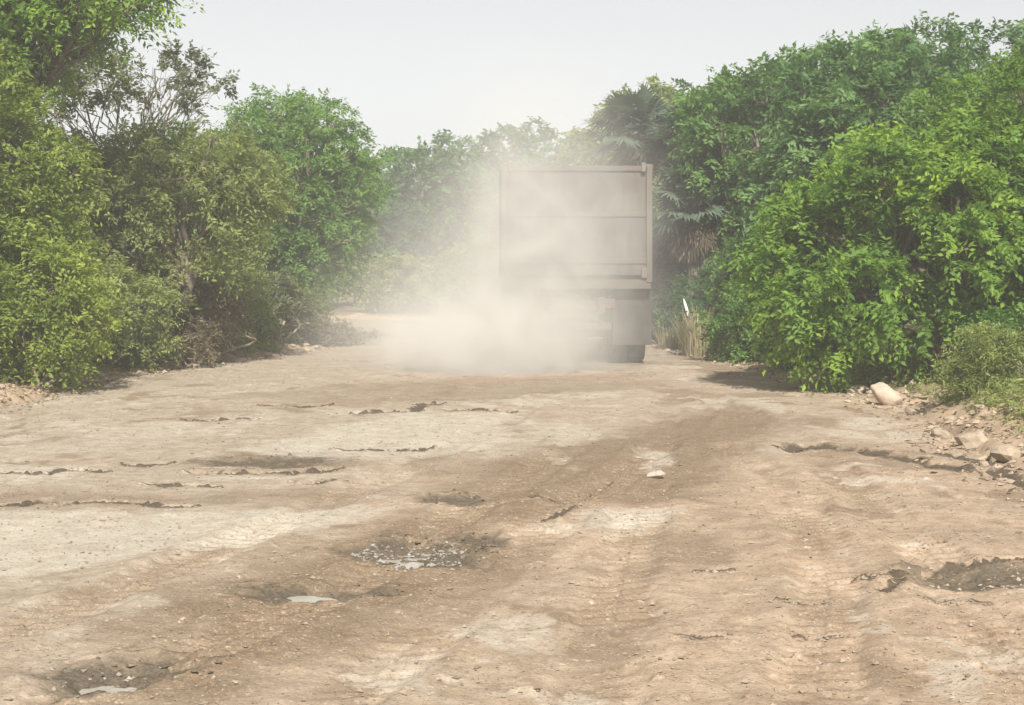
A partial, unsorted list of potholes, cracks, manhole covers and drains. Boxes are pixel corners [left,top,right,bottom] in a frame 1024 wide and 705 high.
pothole [14,647,235,705]
pothole [403,488,501,510]
pothole [173,452,361,470]
crack [0,445,437,508]
pothole [301,530,514,577]
pothole [870,558,1024,595]
pothole [210,577,414,609]
crack [180,401,519,422]
crack [771,442,1024,489]
crack [488,482,614,523]
